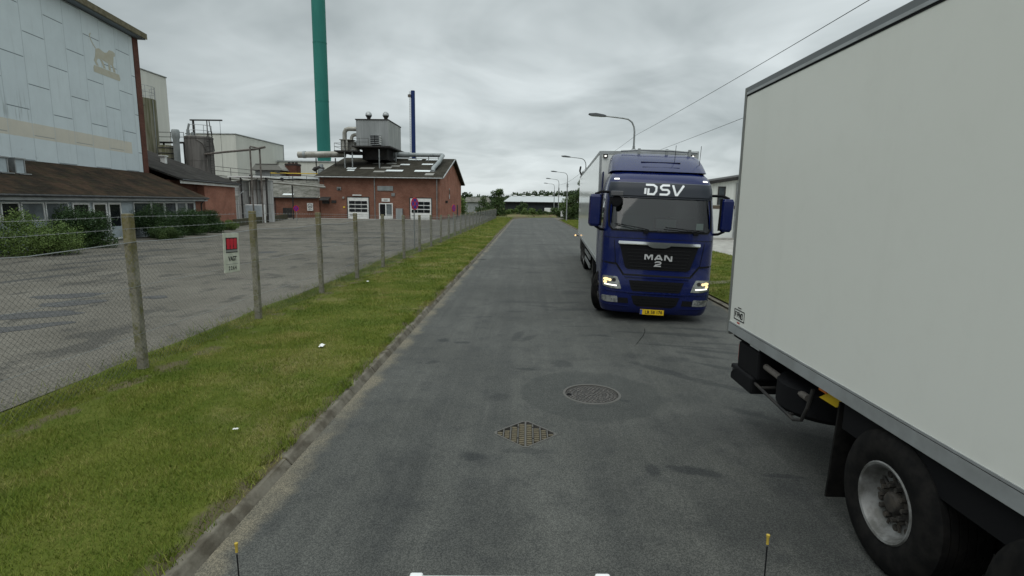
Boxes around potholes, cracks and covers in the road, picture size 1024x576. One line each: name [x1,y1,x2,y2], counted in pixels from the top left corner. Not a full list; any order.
manhole cover [563,384,621,404]
